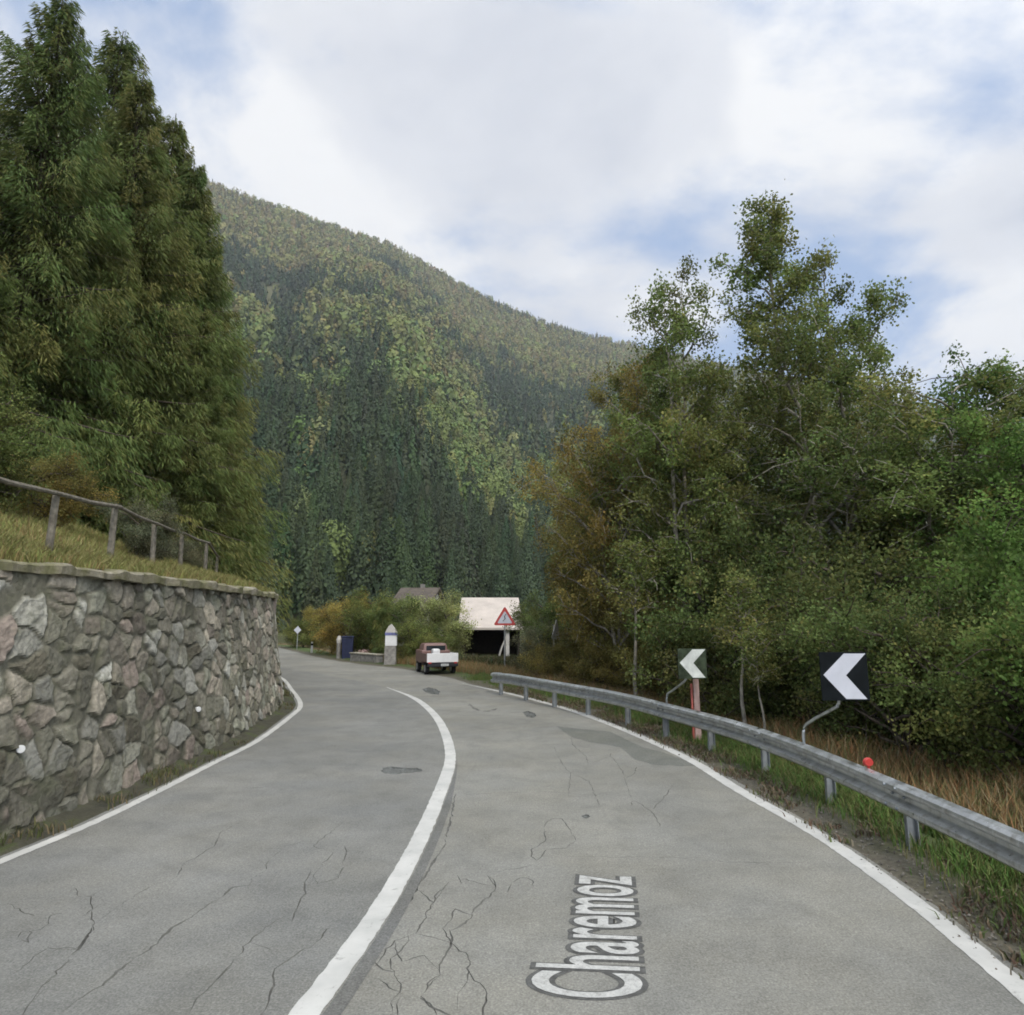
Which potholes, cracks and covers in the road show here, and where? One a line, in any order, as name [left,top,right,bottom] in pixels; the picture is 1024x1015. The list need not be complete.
crack [375,818,812,1015]
crack [466,737,674,826]
crack [11,824,347,1015]
